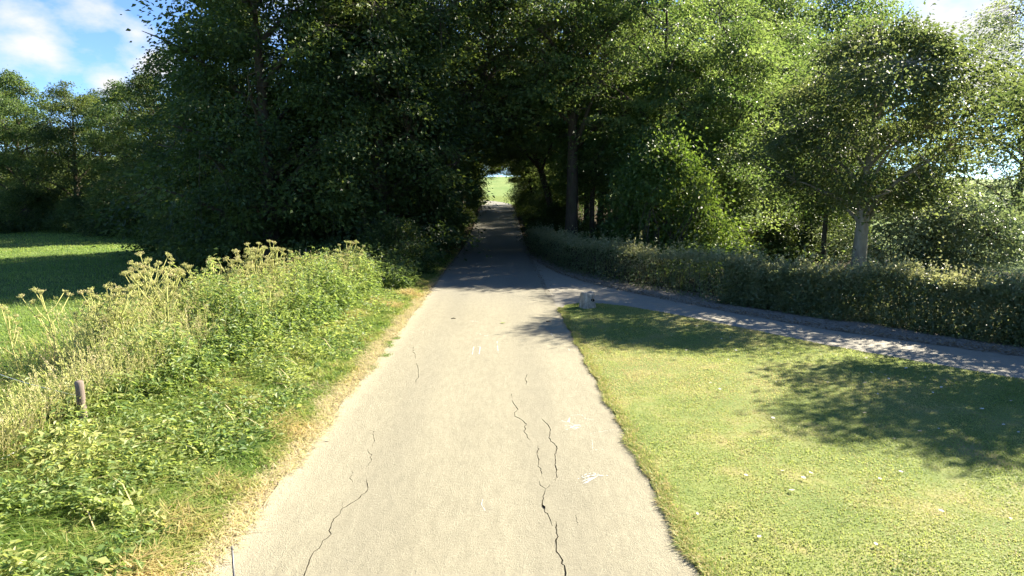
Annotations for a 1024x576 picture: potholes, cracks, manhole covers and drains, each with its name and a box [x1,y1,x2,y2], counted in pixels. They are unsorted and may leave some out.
crack [513,403,566,576]
crack [304,475,368,575]
